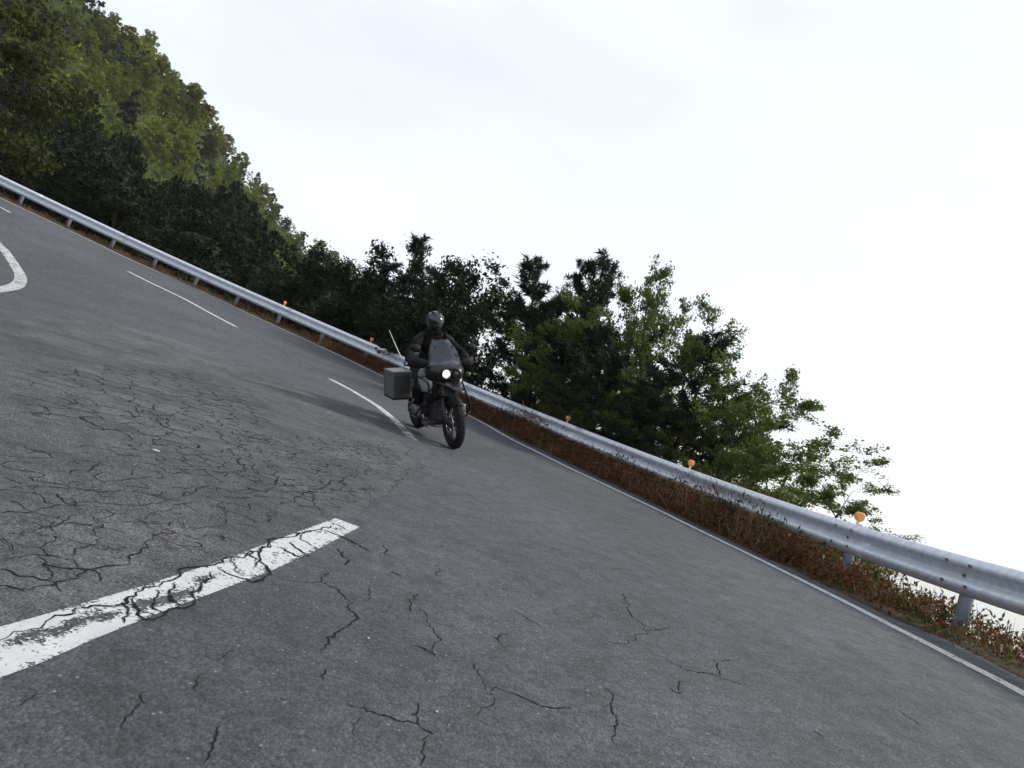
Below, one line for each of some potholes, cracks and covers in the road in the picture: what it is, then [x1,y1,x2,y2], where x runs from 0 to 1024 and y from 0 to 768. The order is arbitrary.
crack [409,594,442,656]
crack [121,692,144,728]
crack [609,691,626,744]
crack [204,726,219,763]
crack [471,662,571,715]
crack [608,594,670,644]
crack [655,655,741,693]
crack [0,364,398,678]
crack [346,702,433,765]
